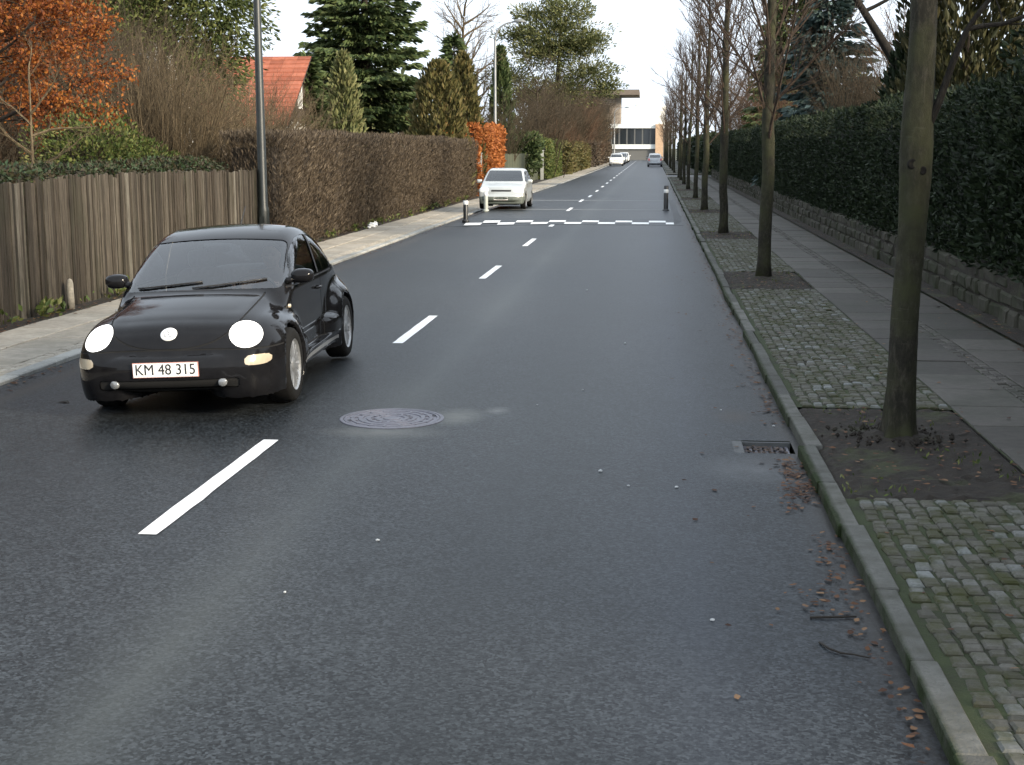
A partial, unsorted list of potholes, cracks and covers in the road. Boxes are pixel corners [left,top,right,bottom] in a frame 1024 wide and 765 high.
drain grate [731,440,790,454]
manhole cover [339,408,444,429]
